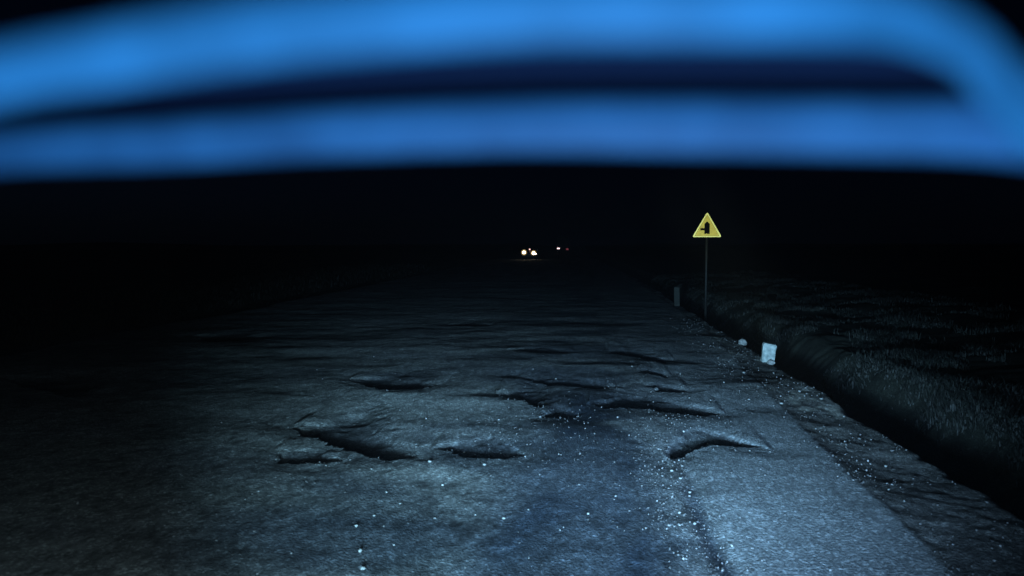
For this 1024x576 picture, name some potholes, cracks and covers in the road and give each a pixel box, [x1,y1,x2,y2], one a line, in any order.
pothole [293,391,430,461]
pothole [492,367,588,419]
pothole [349,361,444,390]
pothole [431,425,531,459]
pothole [652,416,777,462]
